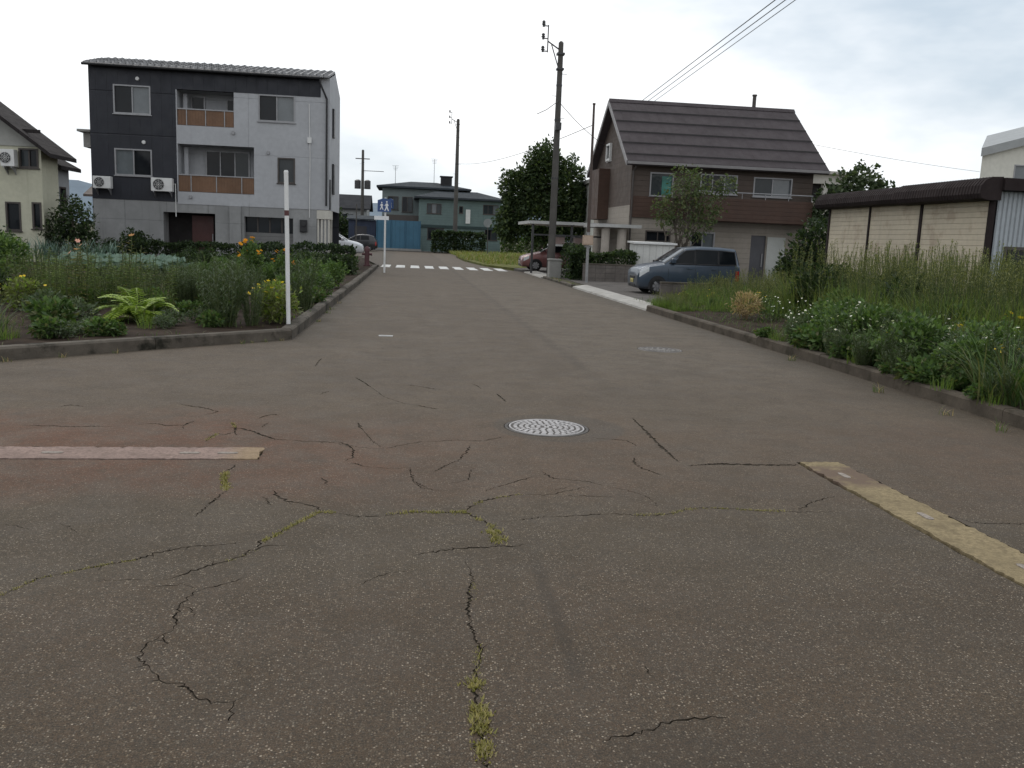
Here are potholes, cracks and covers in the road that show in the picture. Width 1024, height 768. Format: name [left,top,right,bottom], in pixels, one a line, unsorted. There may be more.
manhole cover [505,419,589,437]
crack [0,378,836,768]
